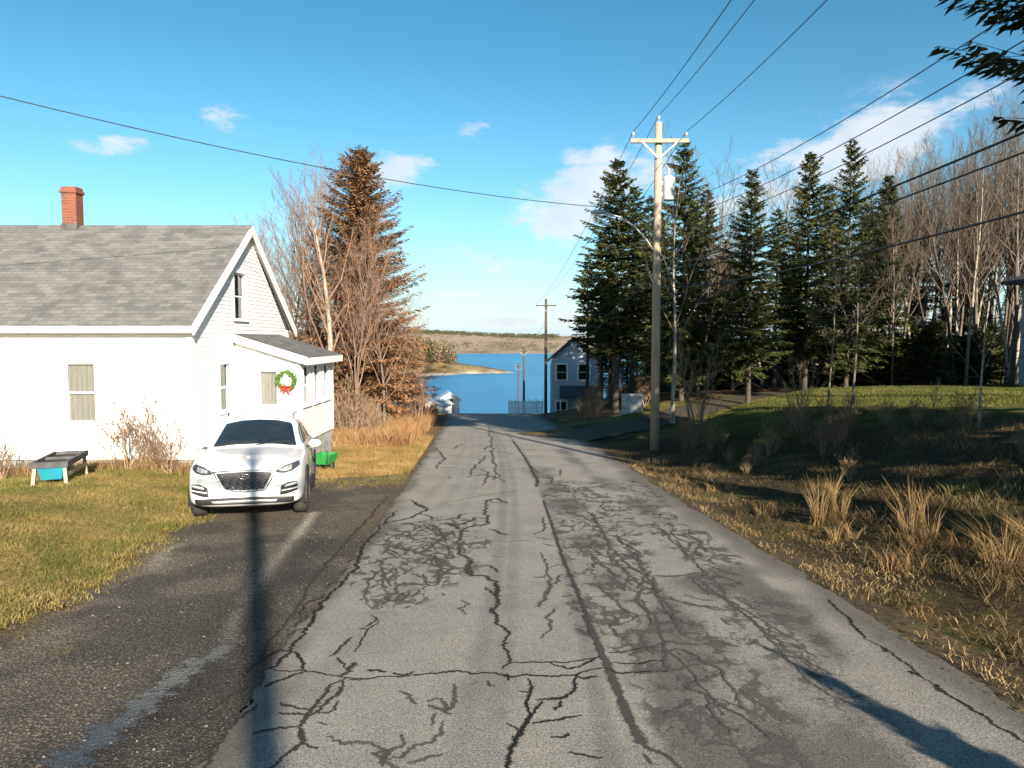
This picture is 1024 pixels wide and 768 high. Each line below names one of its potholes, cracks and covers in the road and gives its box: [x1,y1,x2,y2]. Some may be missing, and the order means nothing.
crack [176,428,1023,768]
